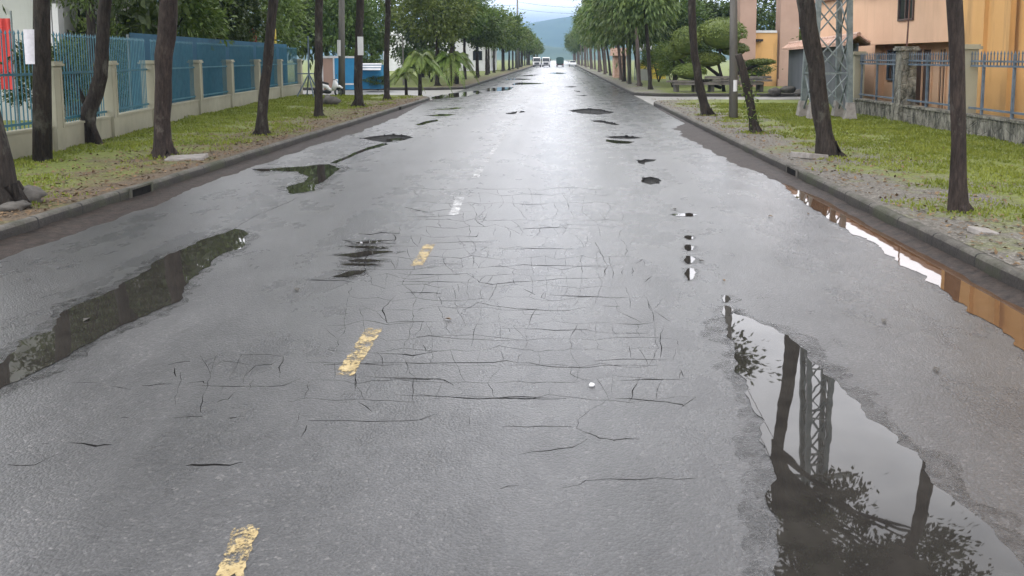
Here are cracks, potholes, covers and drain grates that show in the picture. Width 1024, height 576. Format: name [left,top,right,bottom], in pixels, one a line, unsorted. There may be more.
crack [14,443,111,466]
pothole [360,134,413,143]
drain grate [129,182,153,198]
pothole [641,177,661,185]
crack [296,188,696,455]
crack [79,354,300,422]
